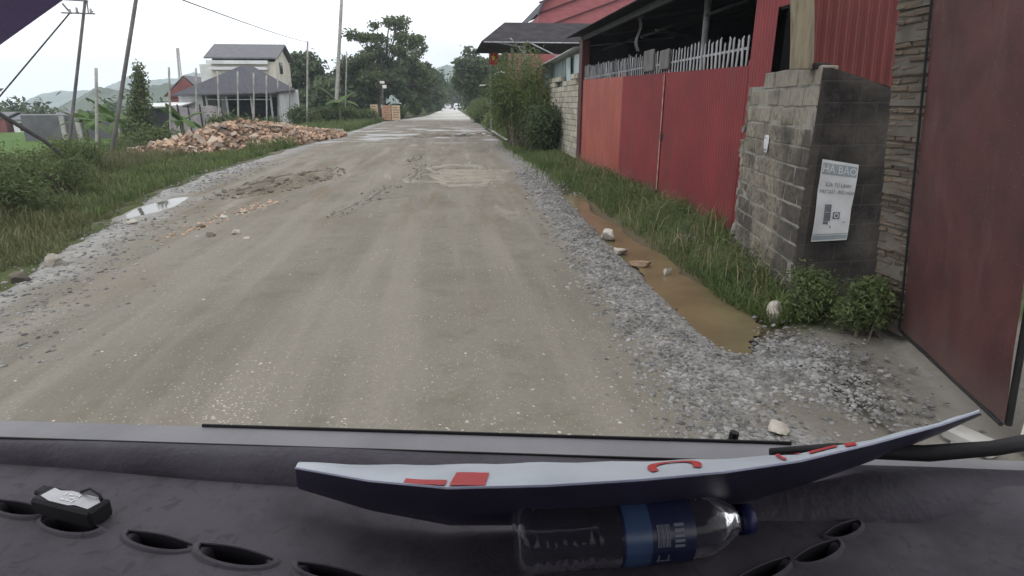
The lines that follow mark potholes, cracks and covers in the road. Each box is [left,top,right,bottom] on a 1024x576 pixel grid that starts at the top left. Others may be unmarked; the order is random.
pothole [215,167,346,199]
